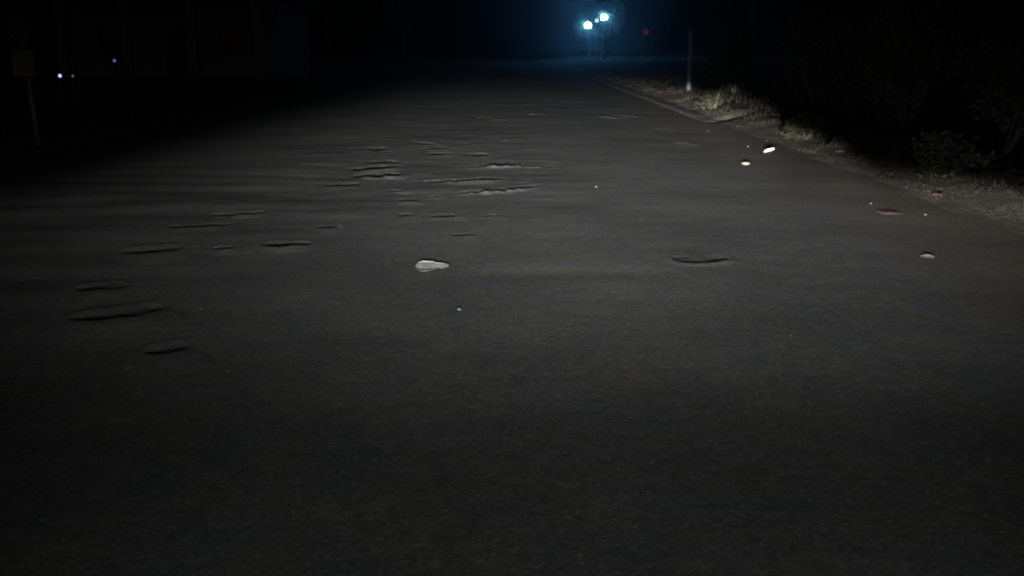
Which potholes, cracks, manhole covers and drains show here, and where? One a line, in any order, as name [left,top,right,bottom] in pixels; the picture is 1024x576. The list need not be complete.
pothole [259,238,312,254]
pothole [342,164,404,173]
pothole [347,171,412,181]
pothole [66,279,128,308]
pothole [142,338,218,376]
pothole [115,242,190,265]
pothole [359,158,407,167]
pothole [661,252,743,267]
pothole [65,301,188,338]
